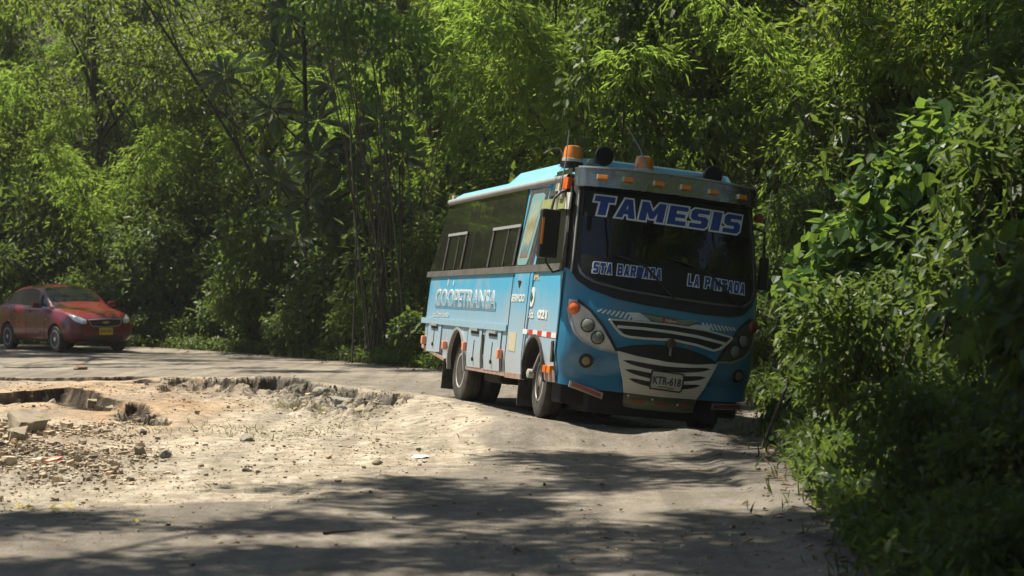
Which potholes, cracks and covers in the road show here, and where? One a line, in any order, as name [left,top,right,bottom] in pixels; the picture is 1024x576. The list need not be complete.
pothole [106,402,177,426]
pothole [159,376,412,440]
